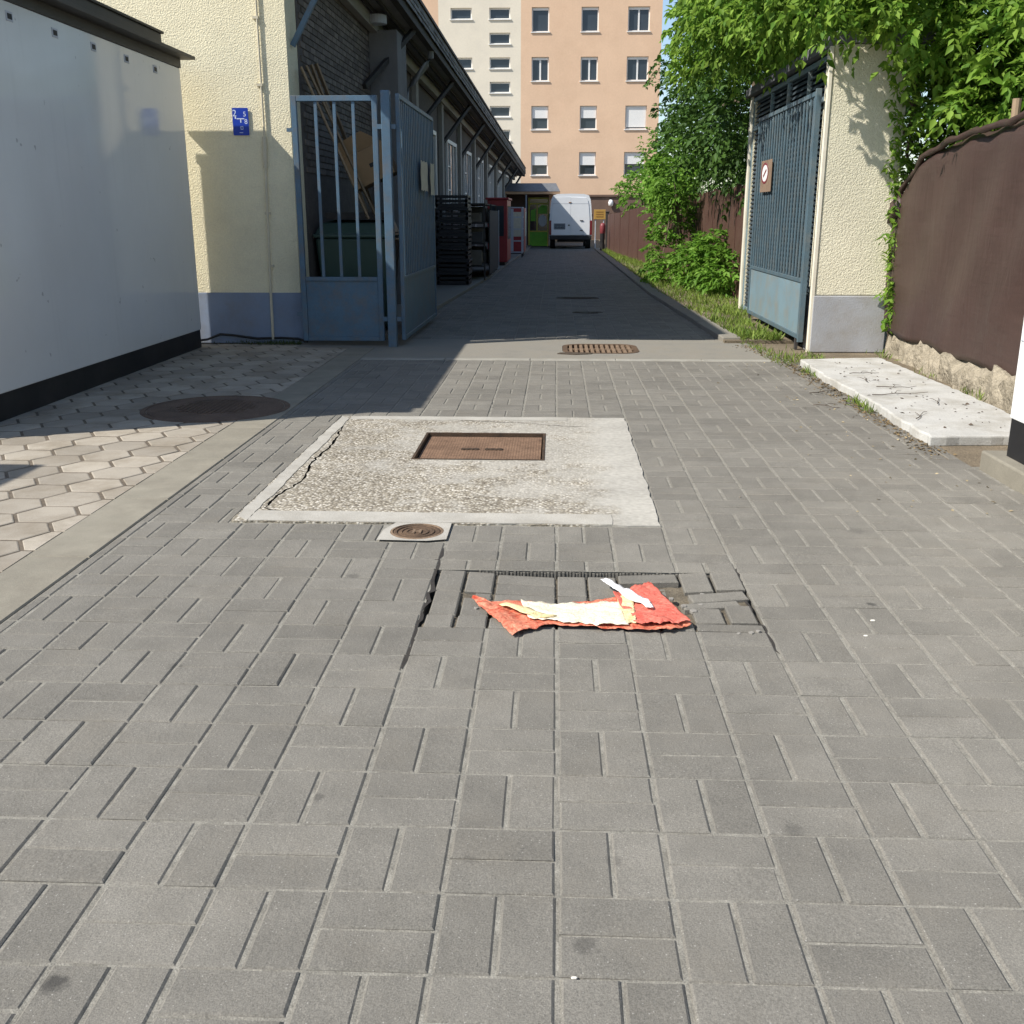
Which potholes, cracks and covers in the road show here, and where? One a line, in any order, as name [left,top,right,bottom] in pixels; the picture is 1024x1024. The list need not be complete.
crack [264,426,344,510]
manhole cover [411,432,546,461]
utility cover [390,523,444,539]
pothole [418,570,768,635]
manhole cover [140,395,290,423]
drain grate [557,344,639,355]
